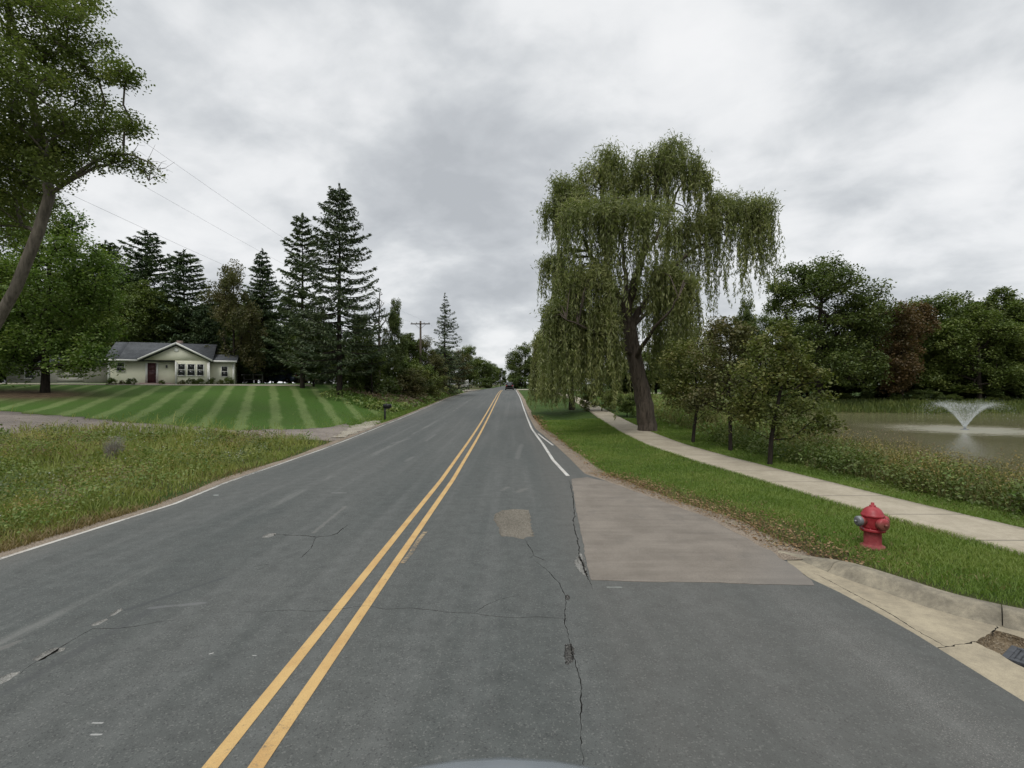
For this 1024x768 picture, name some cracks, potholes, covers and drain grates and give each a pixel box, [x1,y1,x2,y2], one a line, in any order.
crack [269,544,584,764]
pothole [564,644,575,665]
crack [20,620,171,674]
